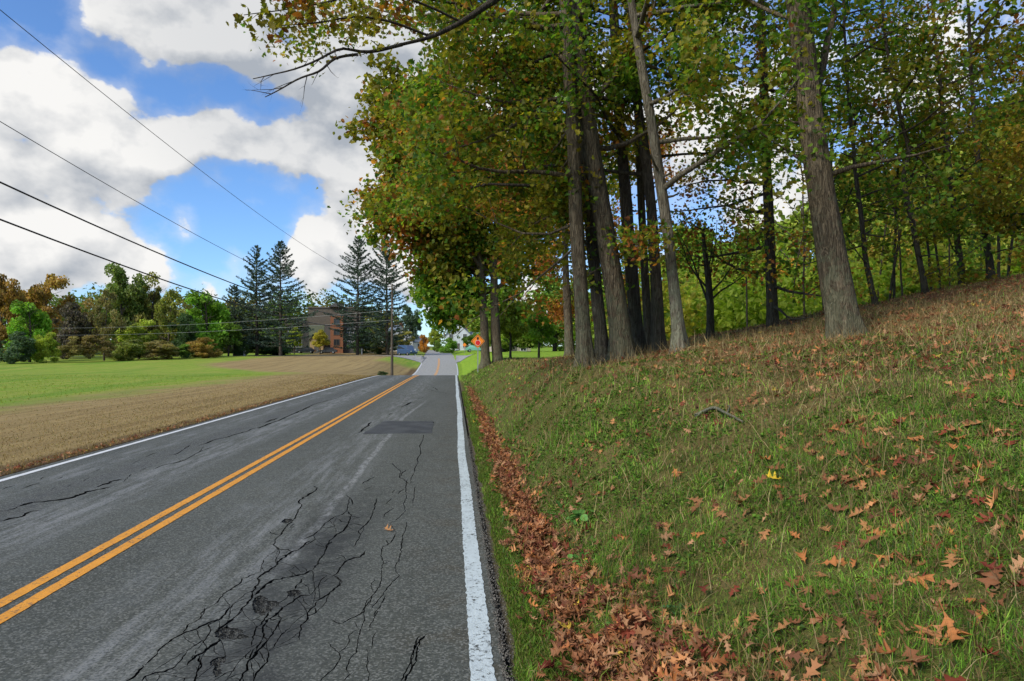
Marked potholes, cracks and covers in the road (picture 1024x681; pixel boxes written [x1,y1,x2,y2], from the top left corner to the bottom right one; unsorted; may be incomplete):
crack [3,394,344,521]
pothole [252,595,280,616]
pothole [214,627,250,641]
crack [127,435,424,681]
